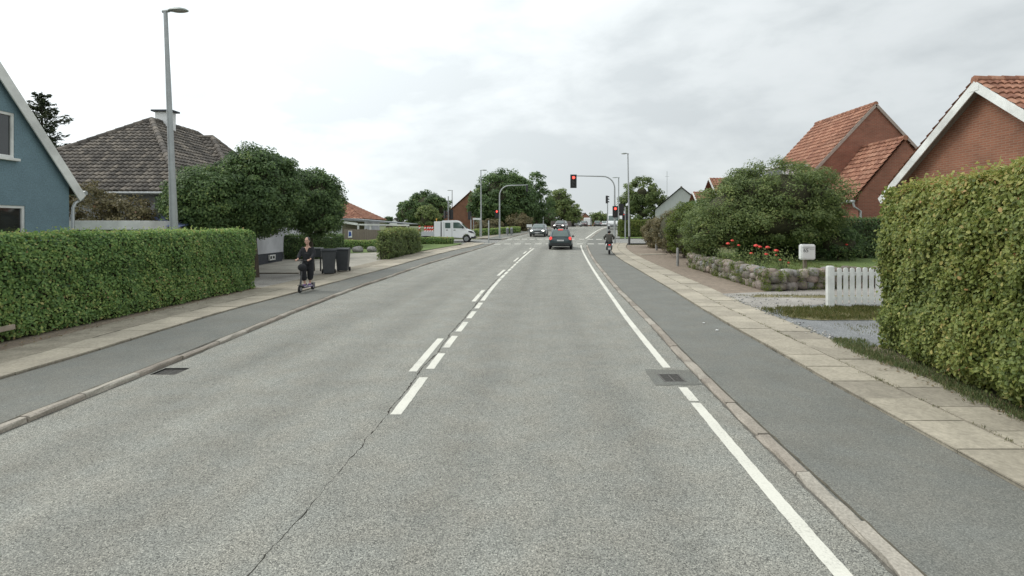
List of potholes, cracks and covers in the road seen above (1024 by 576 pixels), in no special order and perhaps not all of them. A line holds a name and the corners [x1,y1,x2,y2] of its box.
drain grate [657,374,687,382]
crack [247,253,526,576]
